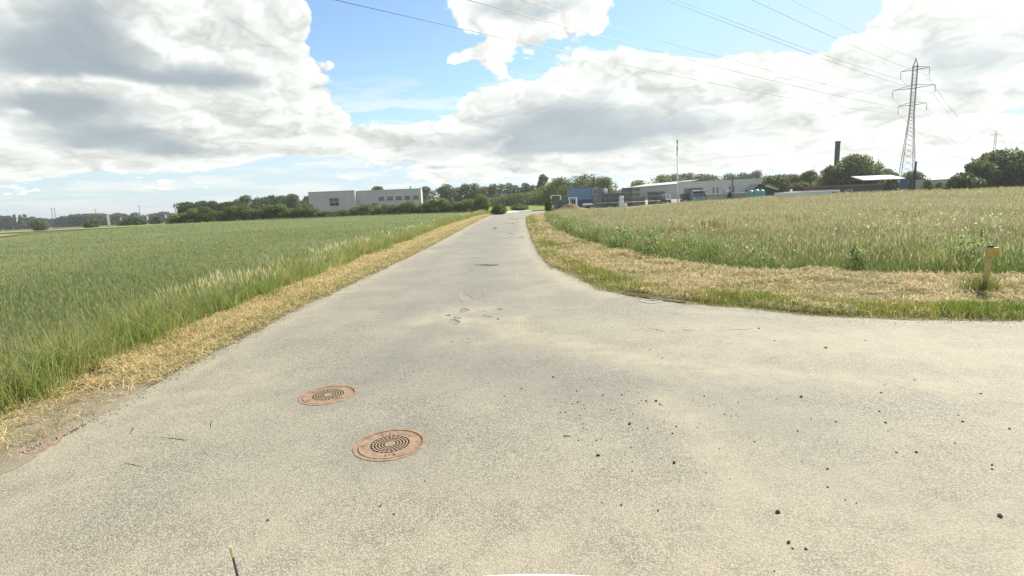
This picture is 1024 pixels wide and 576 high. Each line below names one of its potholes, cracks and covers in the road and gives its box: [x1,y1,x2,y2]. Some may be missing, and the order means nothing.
manhole cover [298,385,358,406]
manhole cover [352,428,427,462]
